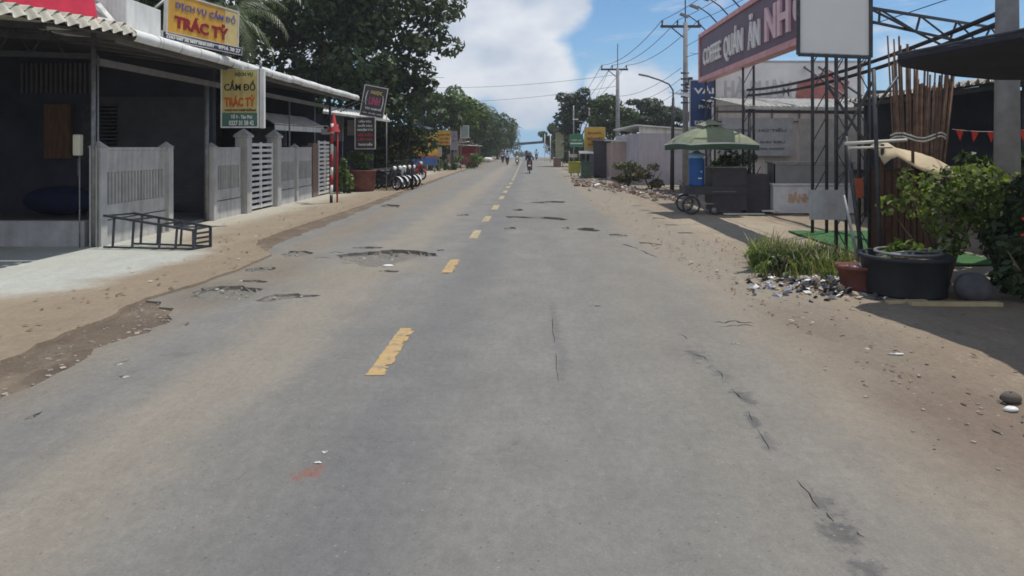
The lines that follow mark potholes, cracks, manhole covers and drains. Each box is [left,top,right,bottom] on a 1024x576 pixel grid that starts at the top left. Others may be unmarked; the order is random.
crack [680,334,769,448]
crack [797,480,864,537]
pothole [336,249,437,267]
pothole [190,285,262,301]
pothole [256,293,320,302]
